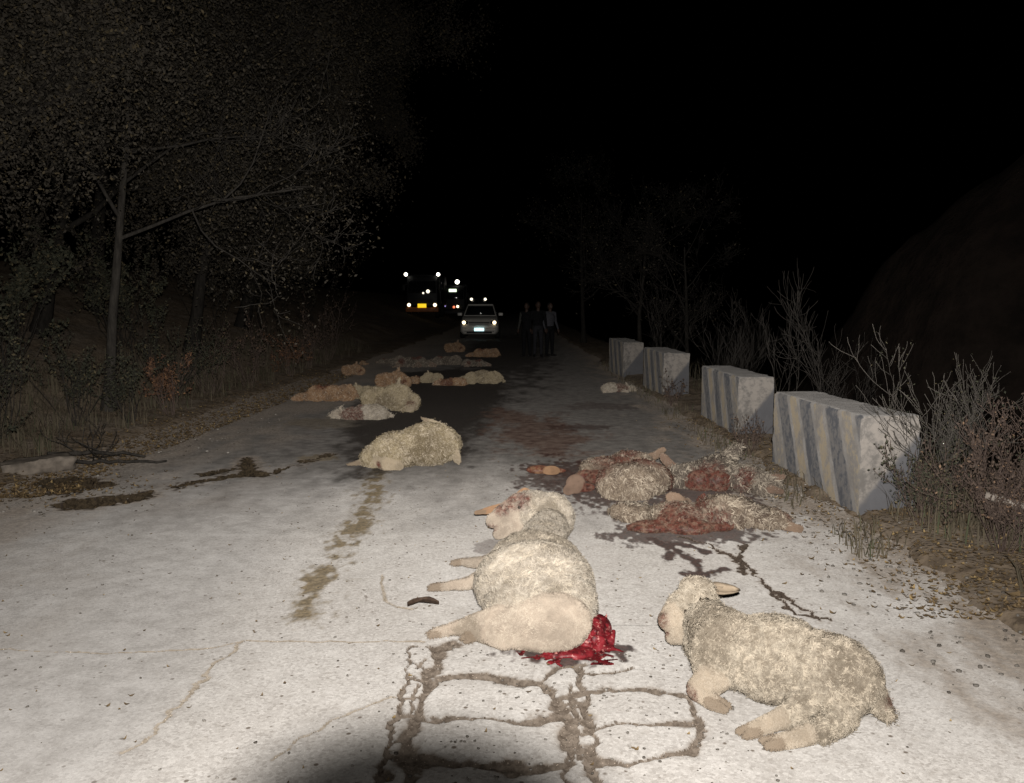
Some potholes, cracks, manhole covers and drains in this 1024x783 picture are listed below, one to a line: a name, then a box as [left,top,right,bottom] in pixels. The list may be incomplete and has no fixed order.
pothole [51,490,154,511]
crack [678,536,832,621]
crack [0,640,707,783]
pothole [238,457,263,477]
